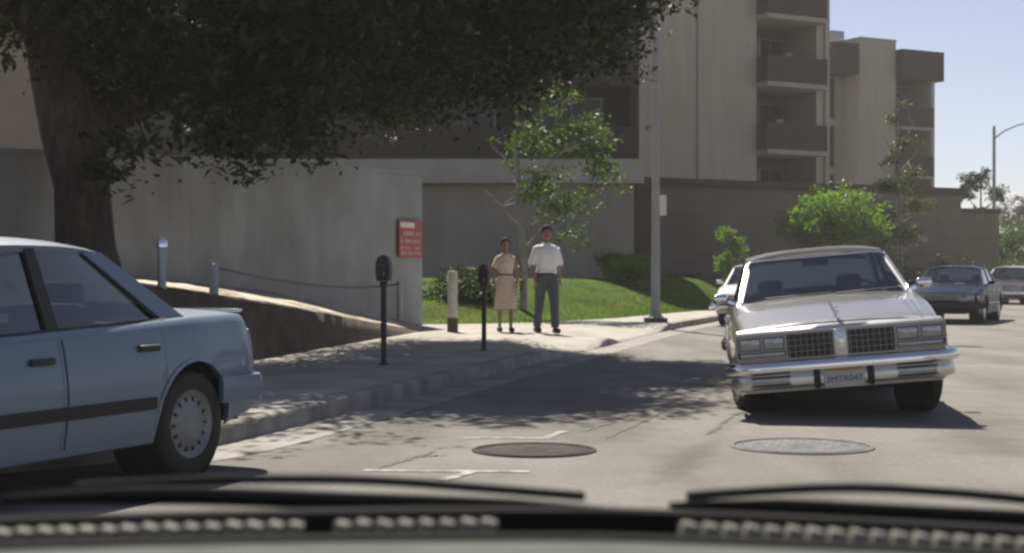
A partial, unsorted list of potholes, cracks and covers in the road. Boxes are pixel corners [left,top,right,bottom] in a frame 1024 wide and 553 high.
crack [582,410,666,438]
manhole cover [729,437,876,455]
manhole cover [472,442,597,458]
crack [706,416,734,434]
crack [378,451,447,469]
